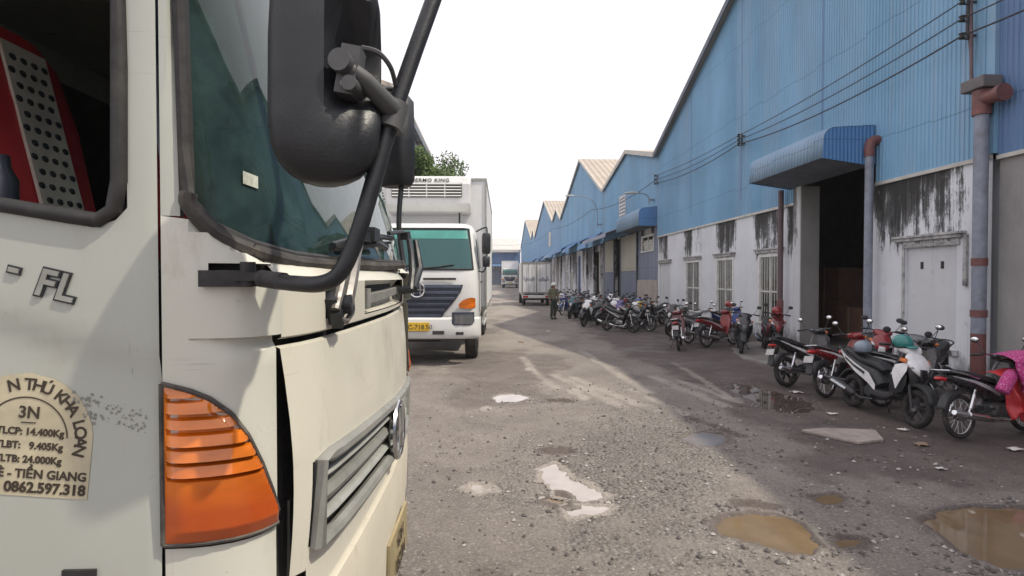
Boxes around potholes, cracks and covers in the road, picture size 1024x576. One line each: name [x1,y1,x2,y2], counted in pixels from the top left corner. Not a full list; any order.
pothole [909,503,1024,575]
pothole [537,445,579,457]
pothole [531,460,617,510]
pothole [802,491,852,508]
pothole [488,392,539,403]
pothole [705,509,830,558]
pothole [726,382,821,415]
pothole [675,430,738,449]
pothole [821,533,877,553]
